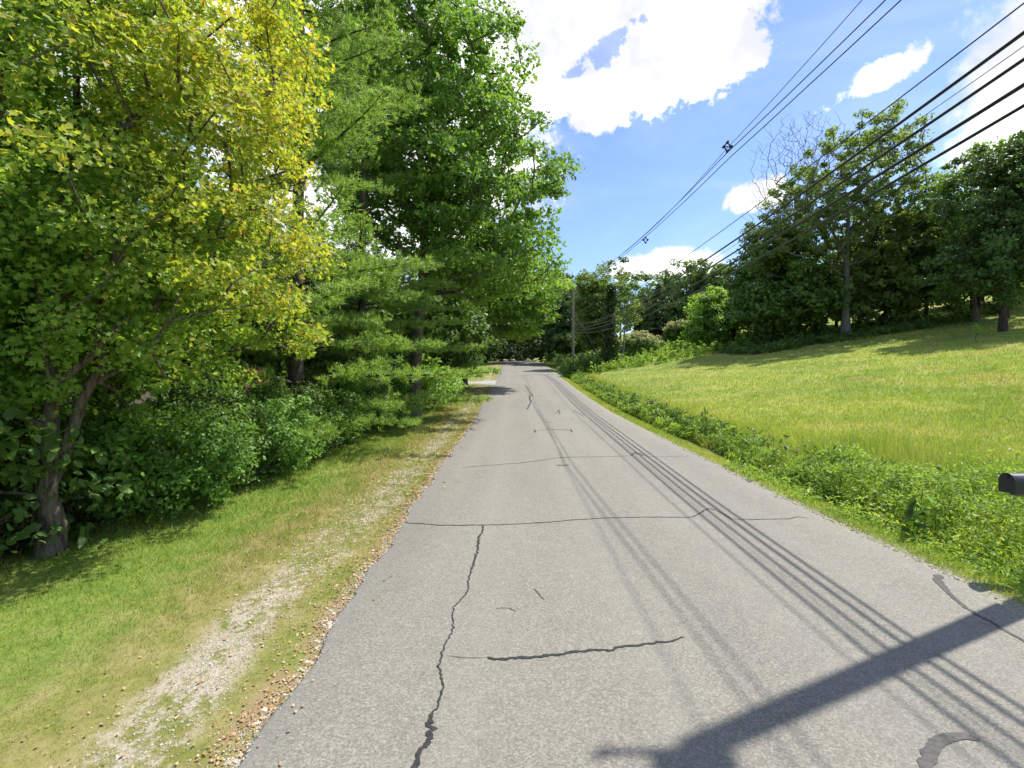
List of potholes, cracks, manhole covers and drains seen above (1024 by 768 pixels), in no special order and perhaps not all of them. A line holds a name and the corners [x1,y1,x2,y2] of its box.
crack [401,508,806,768]
crack [519,377,584,432]
crack [471,452,669,467]
crack [932,574,1024,641]
